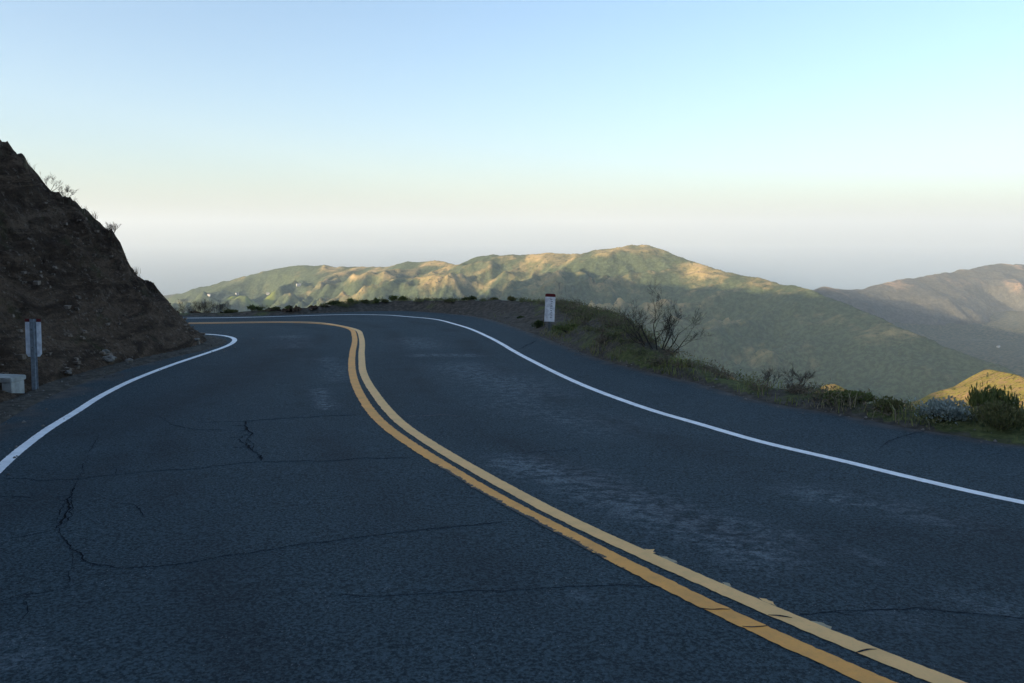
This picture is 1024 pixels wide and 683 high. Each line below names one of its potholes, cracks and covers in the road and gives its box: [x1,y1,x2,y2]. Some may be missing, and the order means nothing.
crack [744,607,1024,627]
crack [336,584,660,601]
crack [0,415,505,625]
